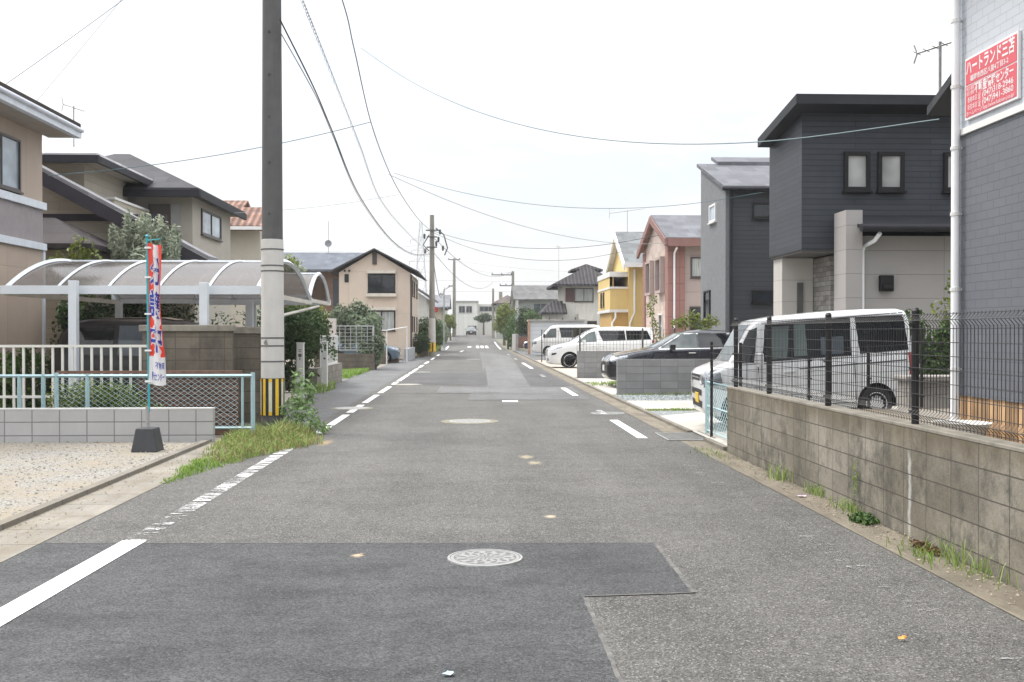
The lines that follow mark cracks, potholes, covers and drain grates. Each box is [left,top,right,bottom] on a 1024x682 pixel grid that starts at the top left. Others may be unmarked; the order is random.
manhole cover [447,549,523,567]
drain grate [654,431,715,441]
